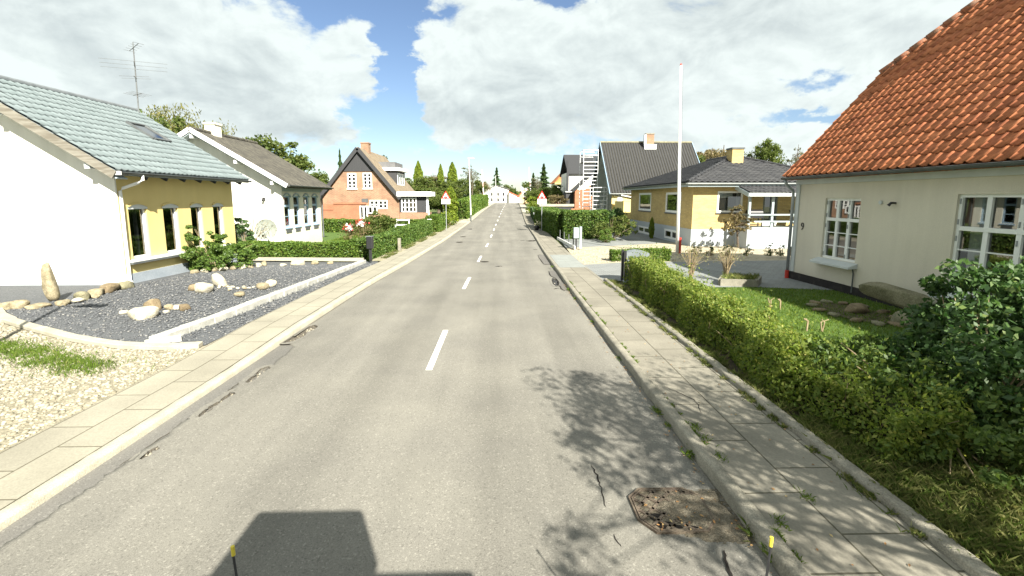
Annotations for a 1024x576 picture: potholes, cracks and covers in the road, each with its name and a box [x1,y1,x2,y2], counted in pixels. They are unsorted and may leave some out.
pothole [239,365,277,385]
pothole [189,388,243,421]
pothole [280,324,322,345]
pothole [129,444,168,462]
